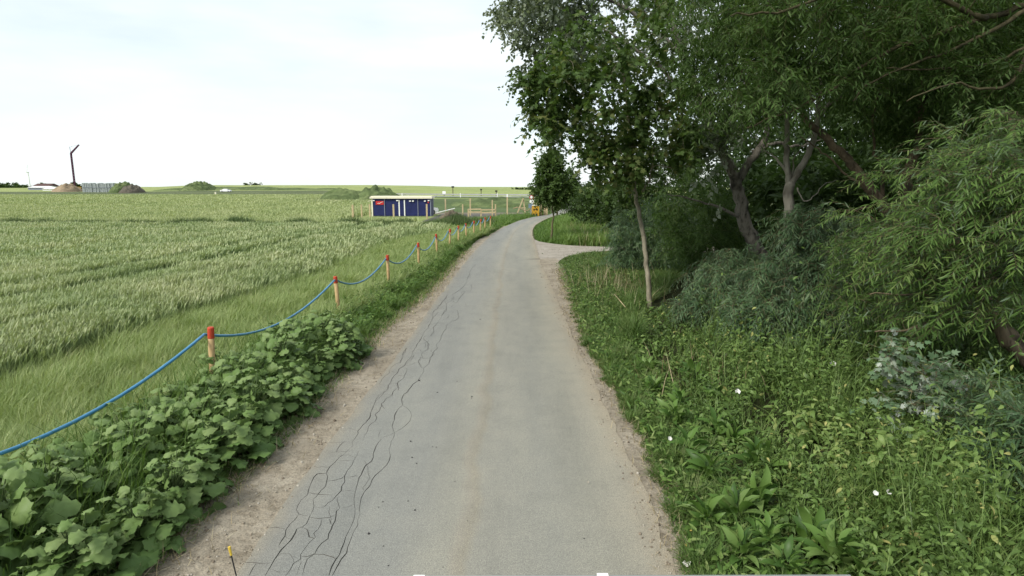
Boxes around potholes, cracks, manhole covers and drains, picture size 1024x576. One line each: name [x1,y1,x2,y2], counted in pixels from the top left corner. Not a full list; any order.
crack [245,266,474,576]
